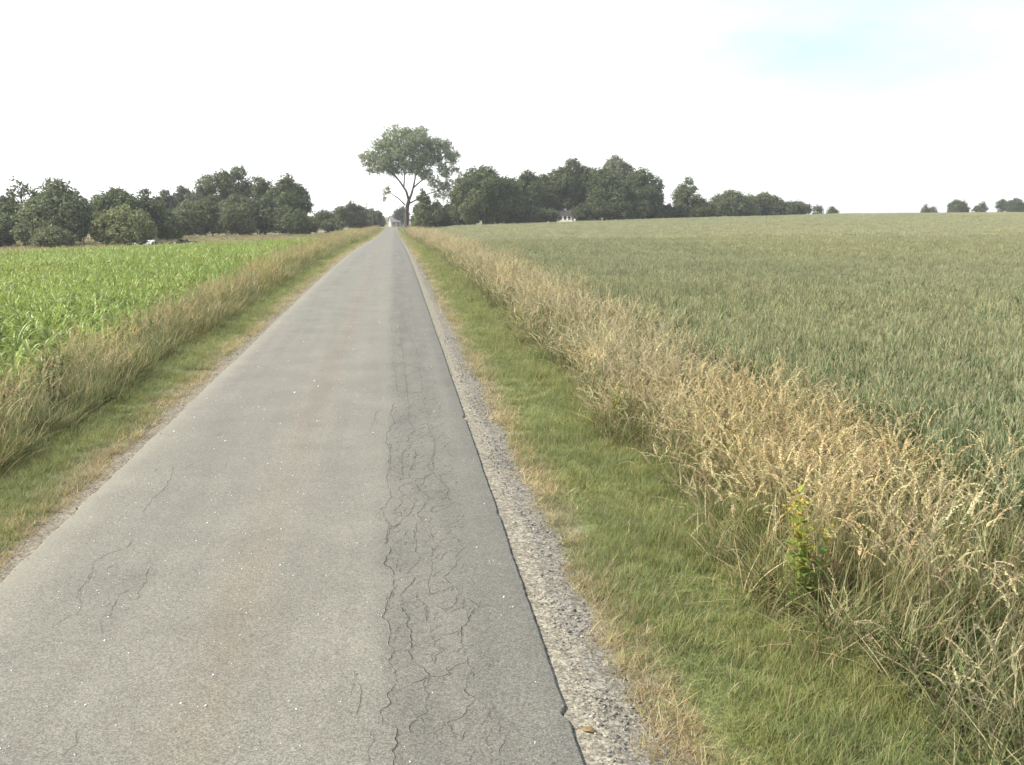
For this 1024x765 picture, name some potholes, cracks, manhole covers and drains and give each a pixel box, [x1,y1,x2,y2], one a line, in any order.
crack [142,463,192,512]
crack [59,541,151,632]
crack [349,271,509,765]
